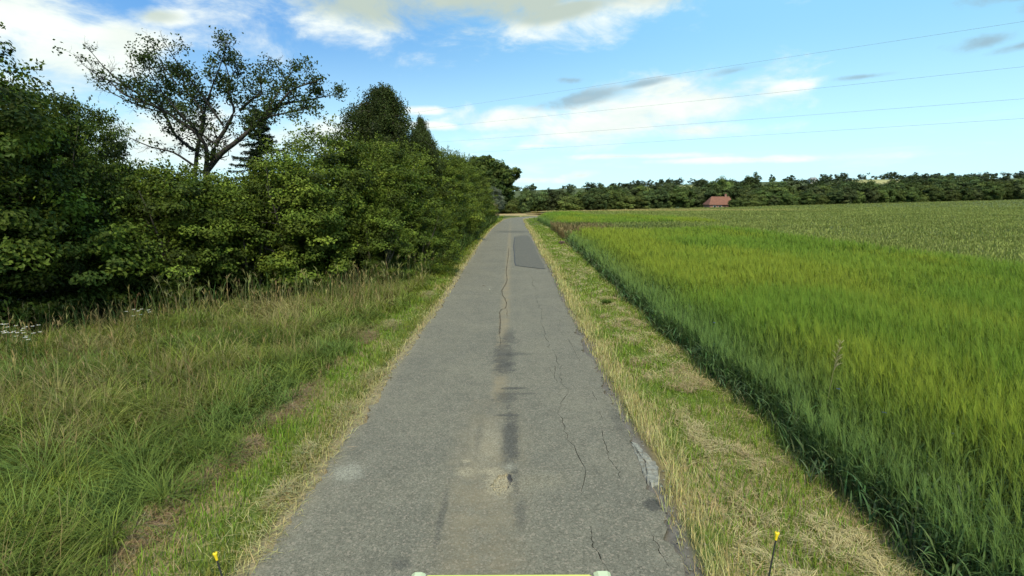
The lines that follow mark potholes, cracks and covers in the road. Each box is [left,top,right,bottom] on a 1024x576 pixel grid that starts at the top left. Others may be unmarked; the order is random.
pothole [491,473,513,496]
